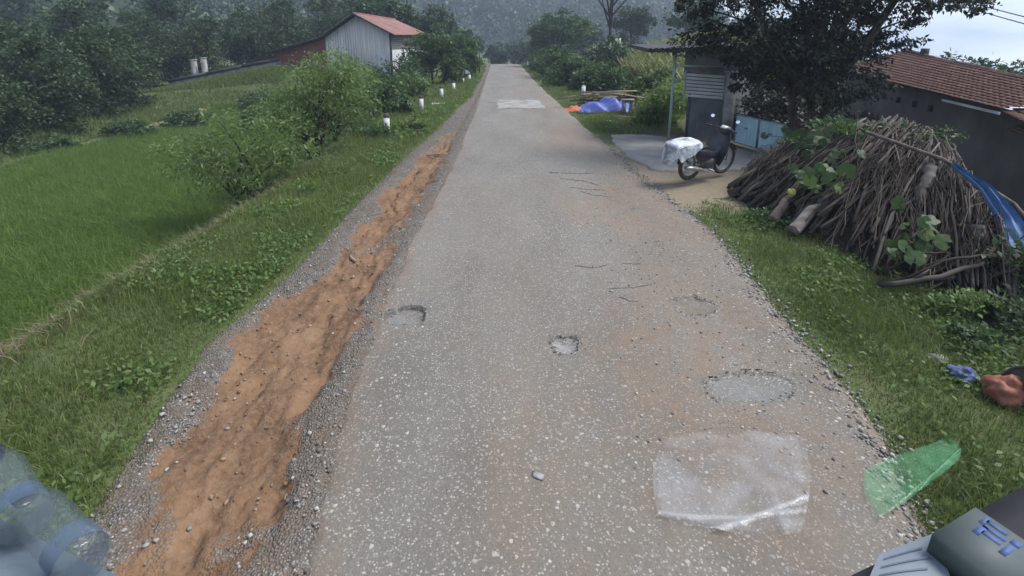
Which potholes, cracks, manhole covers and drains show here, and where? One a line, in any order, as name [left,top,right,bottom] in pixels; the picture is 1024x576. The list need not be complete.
pothole [380,303,430,326]
pothole [547,335,581,356]
crack [565,173,612,198]
